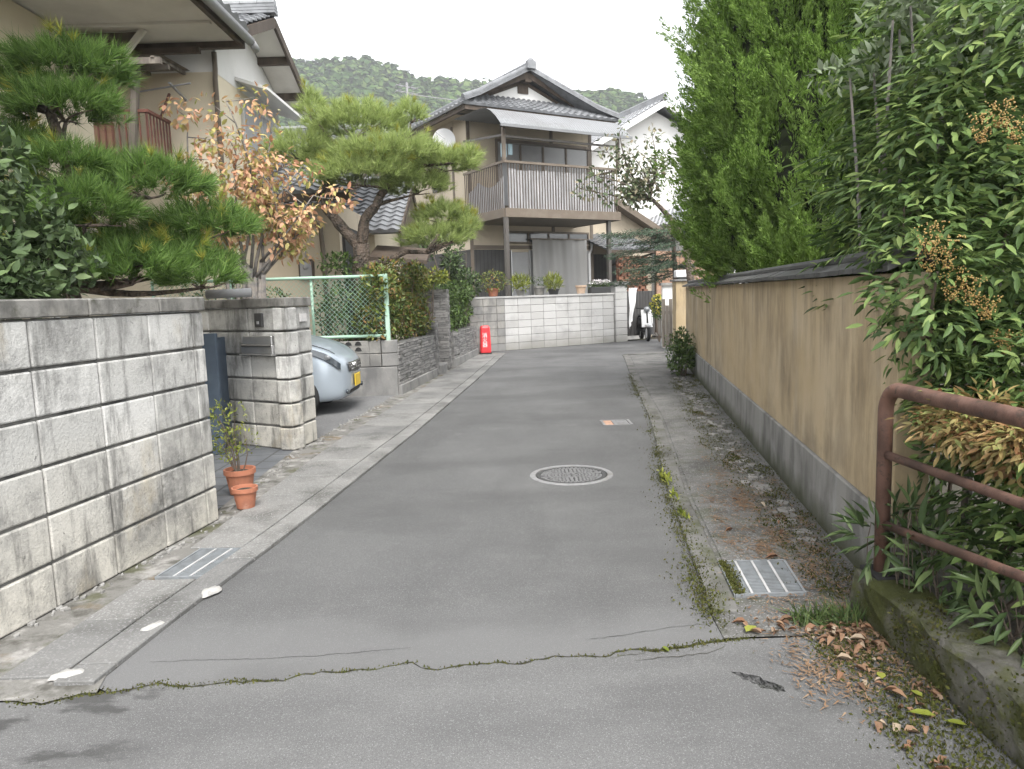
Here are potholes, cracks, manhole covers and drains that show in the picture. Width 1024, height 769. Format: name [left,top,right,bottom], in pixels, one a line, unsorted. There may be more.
manhole cover [530,465,613,485]
crack [4,624,756,708]
drain grate [155,548,241,580]
pothole [732,672,785,693]
drain grate [717,559,806,639]
